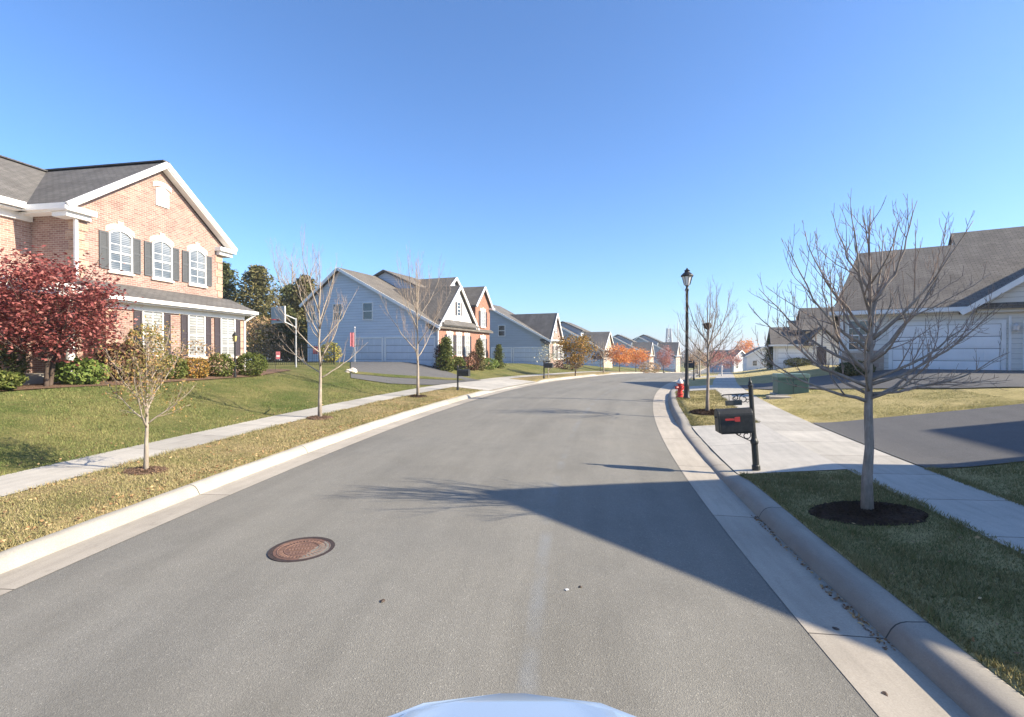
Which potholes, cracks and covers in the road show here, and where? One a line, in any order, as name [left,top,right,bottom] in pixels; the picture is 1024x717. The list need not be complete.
manhole cover [268,537,335,562]
